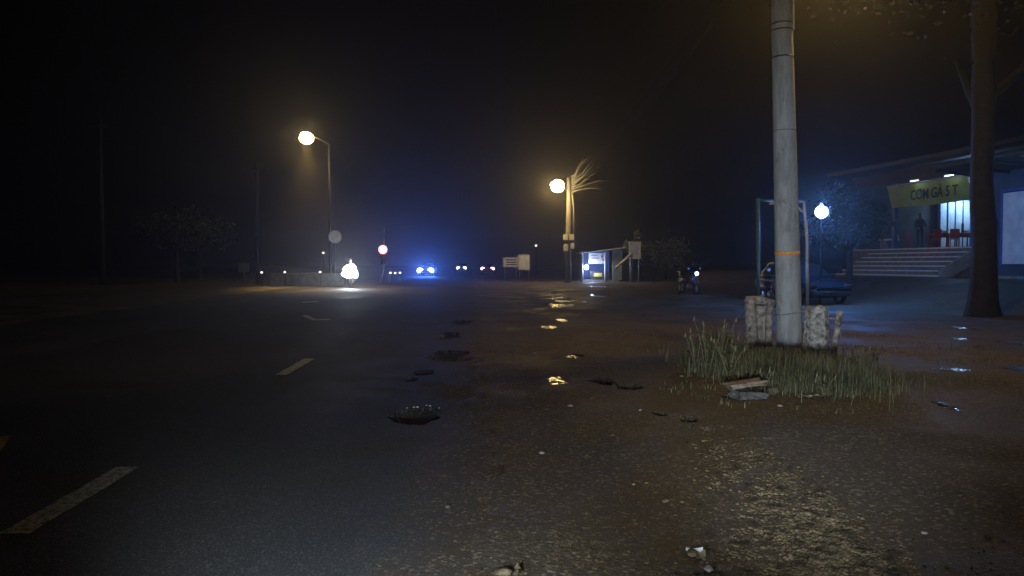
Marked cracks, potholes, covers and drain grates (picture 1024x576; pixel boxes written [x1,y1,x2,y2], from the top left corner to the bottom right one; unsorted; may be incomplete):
pothole [387,405,442,425]
pothole [587,376,616,385]
pothole [615,382,644,391]
pothole [546,376,567,385]
pothole [424,350,471,362]
pothole [436,332,461,340]
